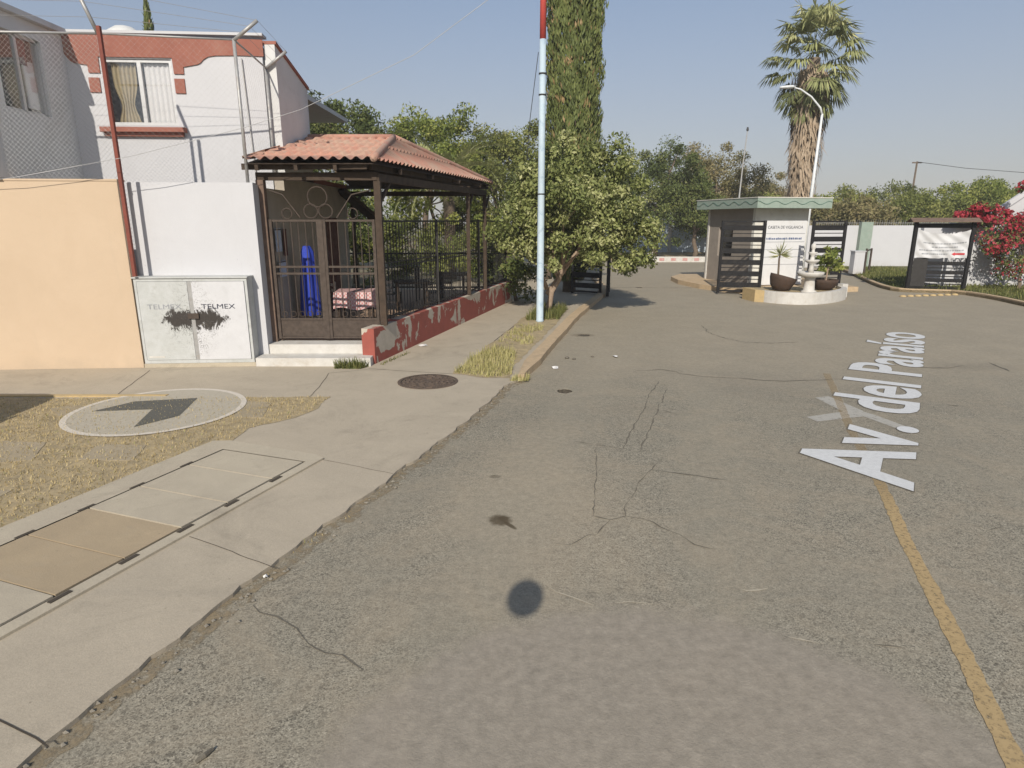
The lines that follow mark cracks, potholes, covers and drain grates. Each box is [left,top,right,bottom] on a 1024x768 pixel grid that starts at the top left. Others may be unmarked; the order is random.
manhole cover [397,374,458,389]
crack [556,369,830,549]
crack [253,605,363,670]
